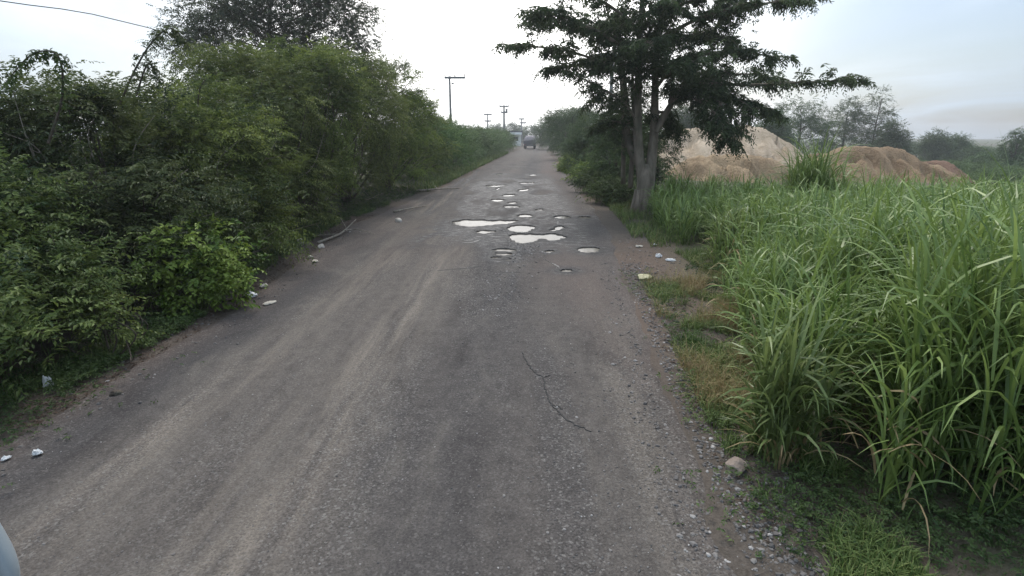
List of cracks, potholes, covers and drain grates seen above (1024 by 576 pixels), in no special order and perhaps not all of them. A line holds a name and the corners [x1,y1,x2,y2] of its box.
pothole [572,246,605,254]
crack [522,352,592,432]
pothole [449,219,522,227]
pothole [505,232,572,244]
pothole [502,224,538,233]
